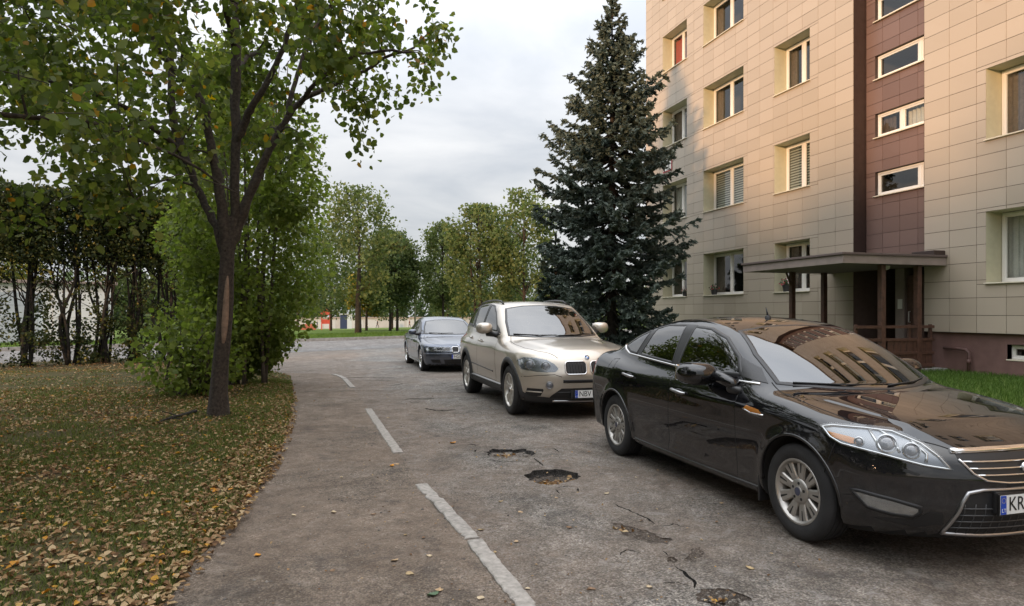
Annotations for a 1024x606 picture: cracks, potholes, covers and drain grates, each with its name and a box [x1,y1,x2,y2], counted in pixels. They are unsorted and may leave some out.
pothole [613,523,673,544]
pothole [524,469,581,485]
pothole [695,588,752,606]
pothole [487,449,536,458]
crack [663,551,697,586]
crack [616,504,688,527]
